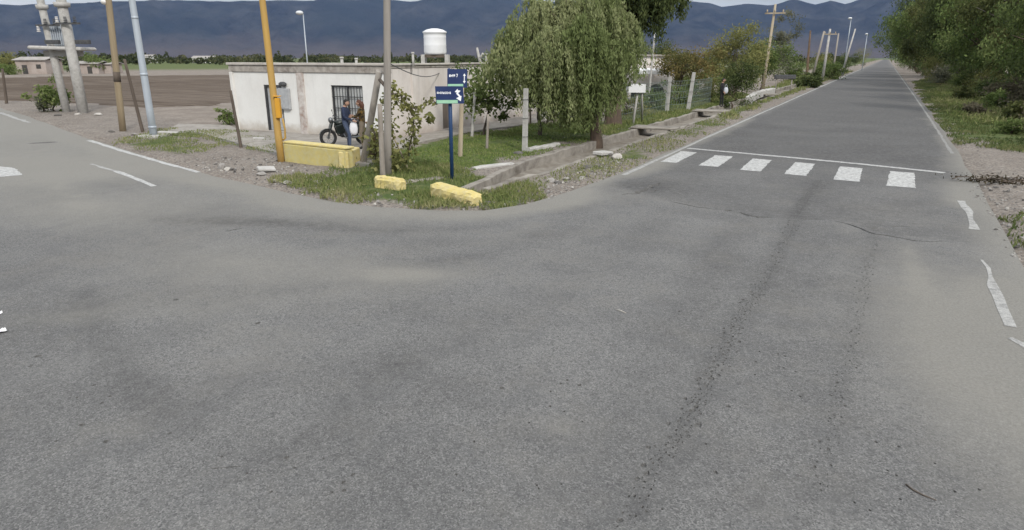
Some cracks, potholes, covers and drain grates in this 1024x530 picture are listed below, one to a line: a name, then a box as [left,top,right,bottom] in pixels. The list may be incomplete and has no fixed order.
crack [616,180,818,527]
crack [811,229,879,492]
